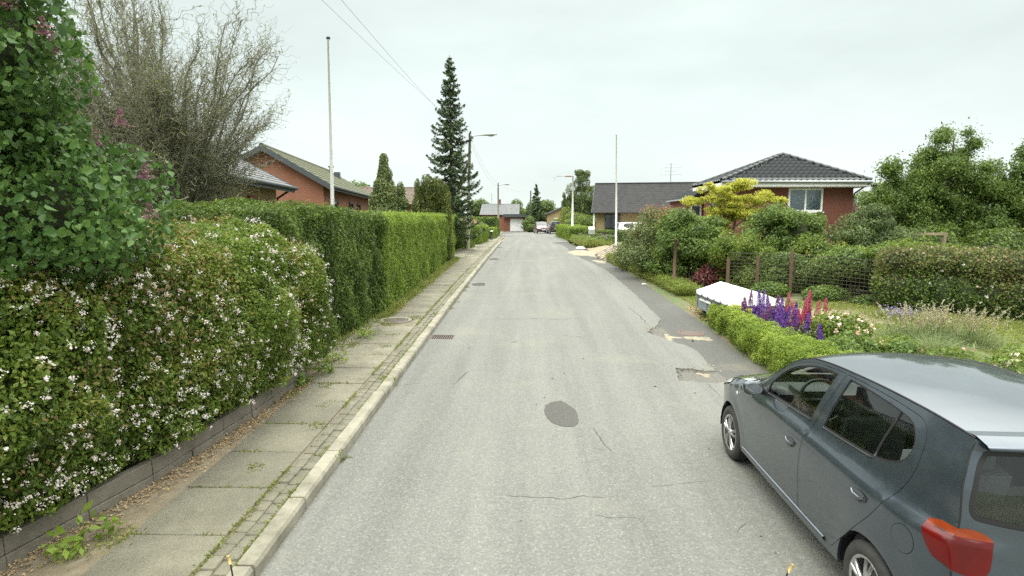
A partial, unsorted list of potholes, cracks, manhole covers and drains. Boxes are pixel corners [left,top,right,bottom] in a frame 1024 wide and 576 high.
pothole [676,369,727,383]
